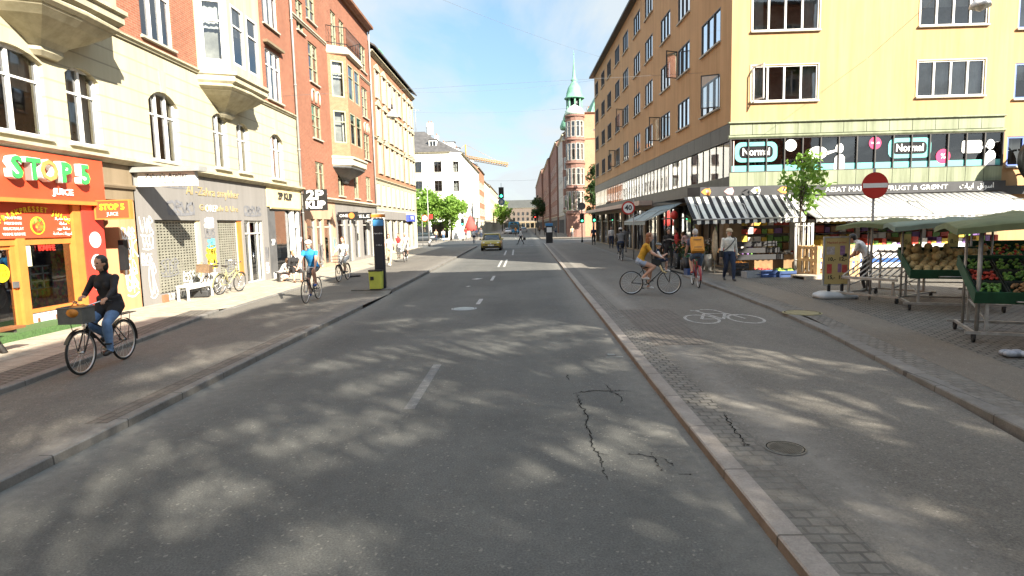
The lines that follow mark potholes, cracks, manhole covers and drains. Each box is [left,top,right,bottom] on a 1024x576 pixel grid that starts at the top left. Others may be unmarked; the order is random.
manhole cover [764,441,808,456]
crack [566,375,623,477]
